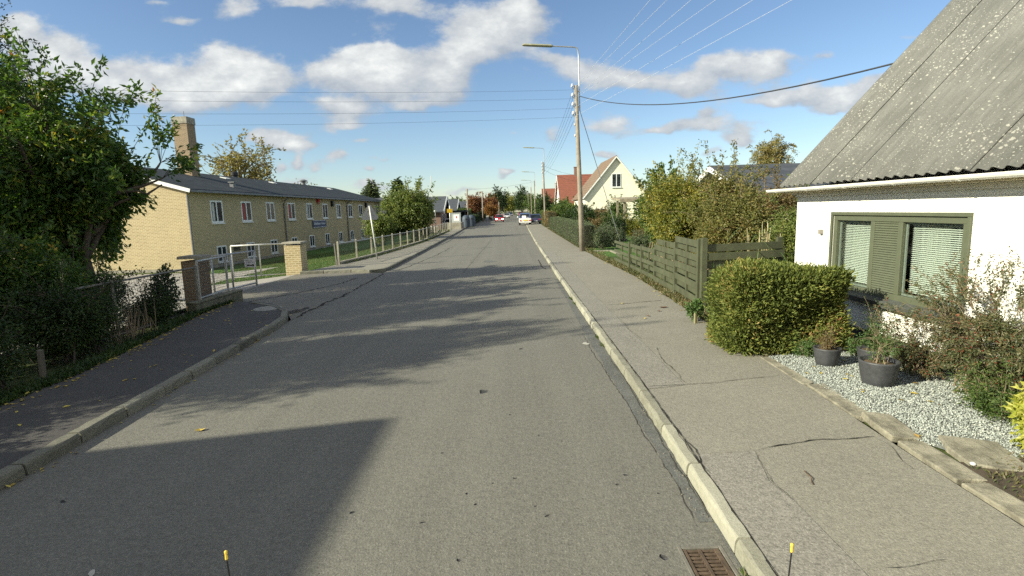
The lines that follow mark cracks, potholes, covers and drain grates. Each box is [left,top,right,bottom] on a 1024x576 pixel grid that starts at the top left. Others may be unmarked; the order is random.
crack [249,247,451,317]
crack [761,436,911,467]
drain grate [677,545,740,576]
